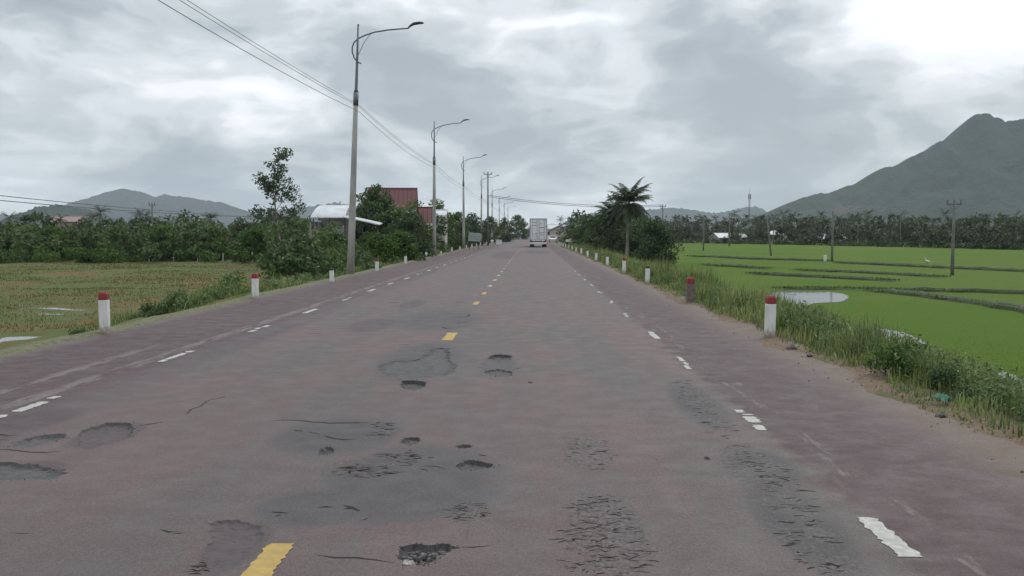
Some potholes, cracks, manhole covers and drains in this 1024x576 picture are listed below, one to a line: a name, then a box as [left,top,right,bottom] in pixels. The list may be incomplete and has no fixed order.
pothole [400,380,426,391]
crack [560,434,613,470]
pothole [398,543,461,566]
crack [550,495,659,576]
crack [443,503,491,521]
pothole [456,460,493,470]
pothole [0,462,69,481]
crack [274,420,448,478]
pothole [77,422,135,449]
pothole [484,369,512,377]
